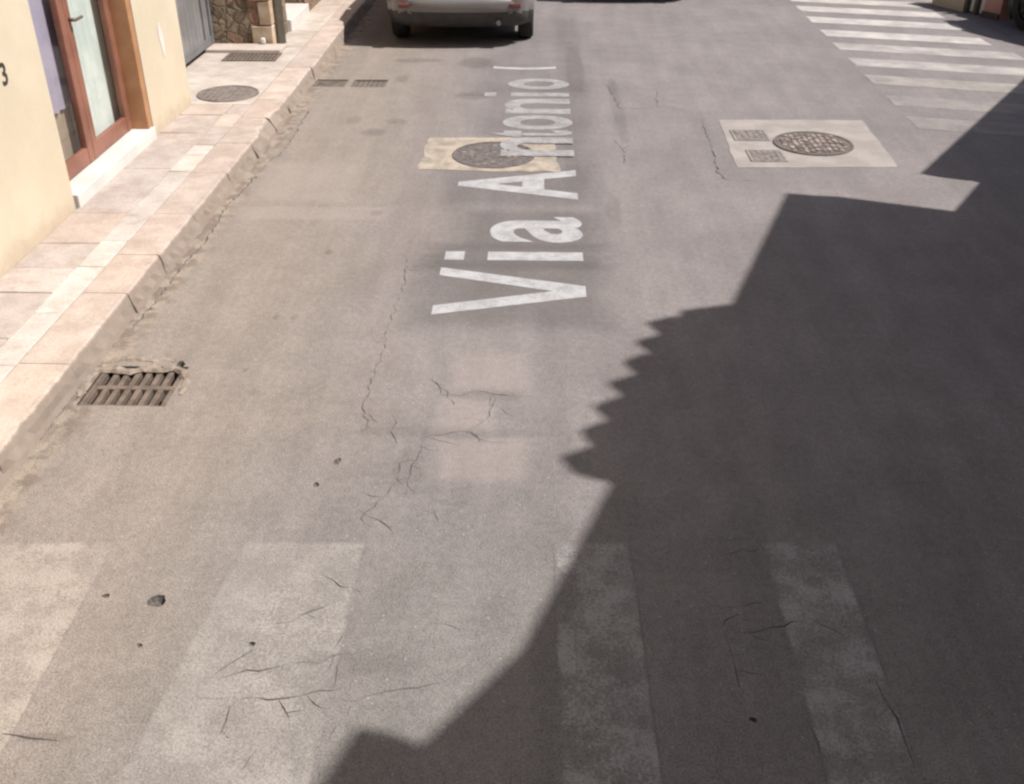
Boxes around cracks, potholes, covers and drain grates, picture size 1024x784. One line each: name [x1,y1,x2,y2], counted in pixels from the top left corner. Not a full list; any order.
drain grate [76,356,191,406]
crack [209,579,468,767]
crack [354,260,419,434]
drain grate [221,53,282,61]
crack [360,380,514,534]
crack [875,680,921,780]
crack [693,585,843,687]
manhole cover [197,85,259,102]
